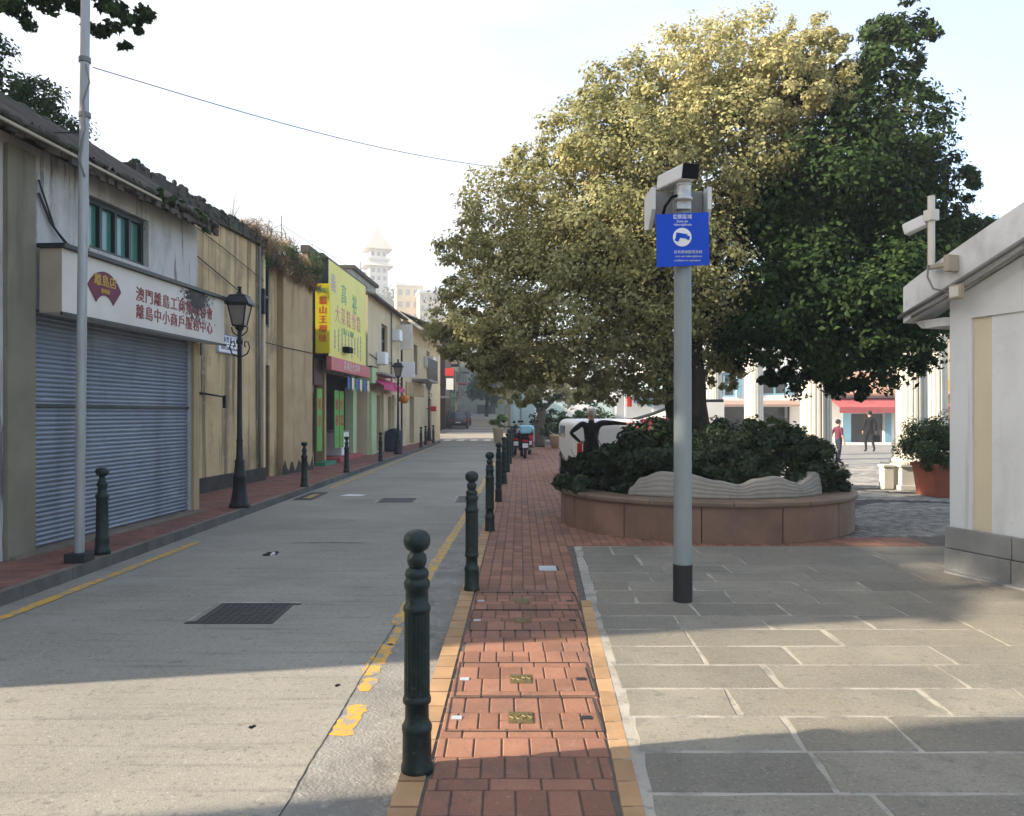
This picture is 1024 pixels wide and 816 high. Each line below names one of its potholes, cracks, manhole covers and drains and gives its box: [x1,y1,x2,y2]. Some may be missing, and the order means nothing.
manhole cover [290,492,329,500]
